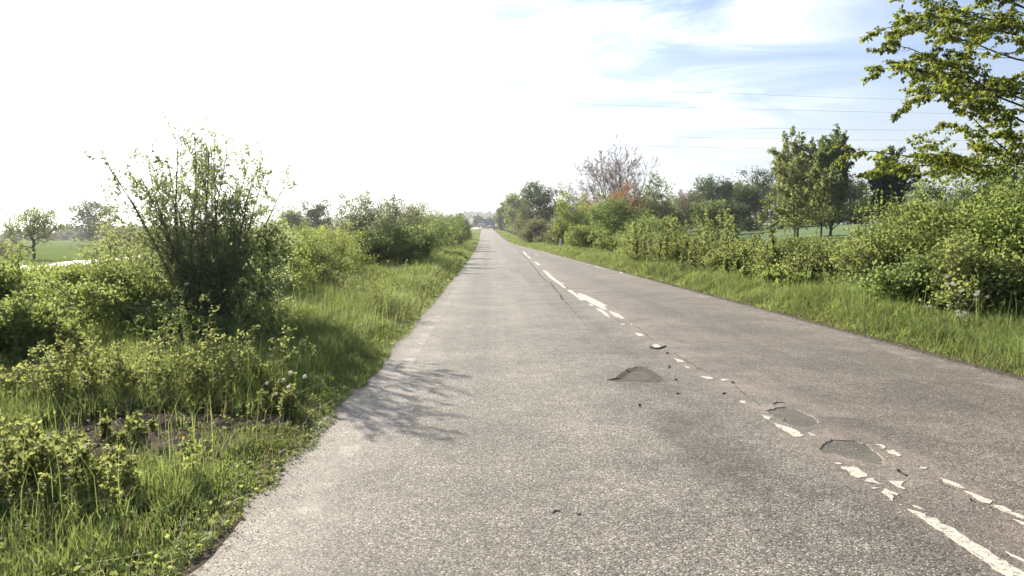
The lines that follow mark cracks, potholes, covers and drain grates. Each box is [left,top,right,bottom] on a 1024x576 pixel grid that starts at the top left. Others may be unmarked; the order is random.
crack [519,251,582,321]
pothole [607,366,664,383]
pothole [820,439,885,465]
pothole [766,407,819,427]
